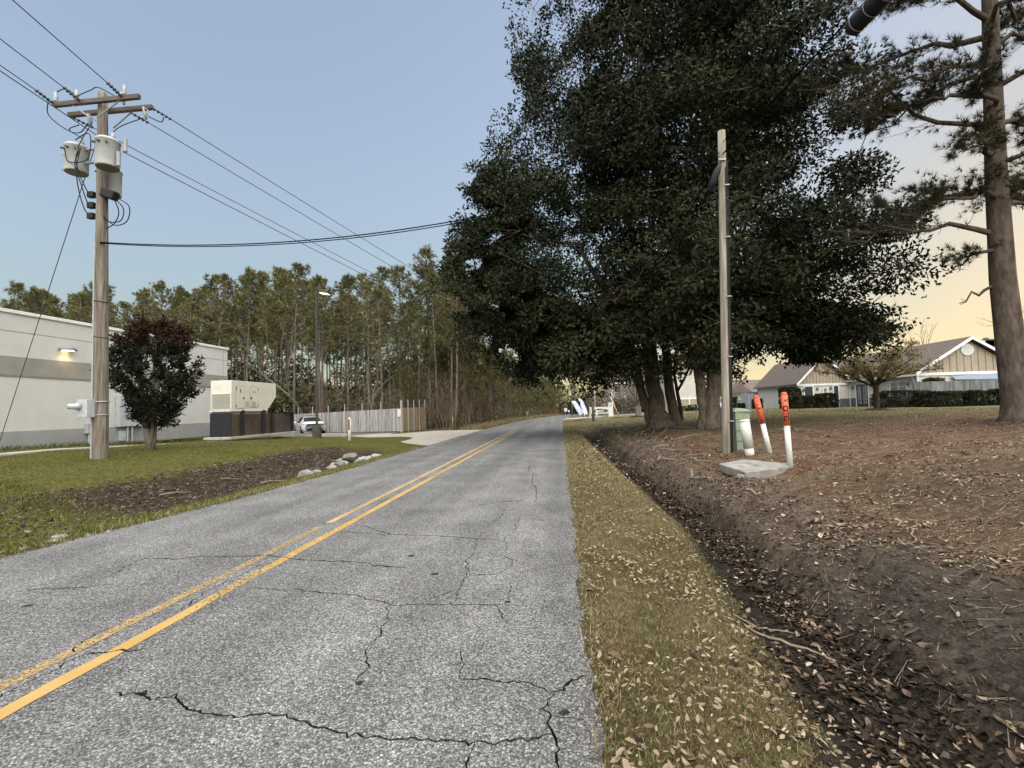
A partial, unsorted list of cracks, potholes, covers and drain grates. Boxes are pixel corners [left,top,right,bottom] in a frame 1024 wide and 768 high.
crack [107,655,589,768]
crack [4,555,393,595]
crack [257,525,516,689]
